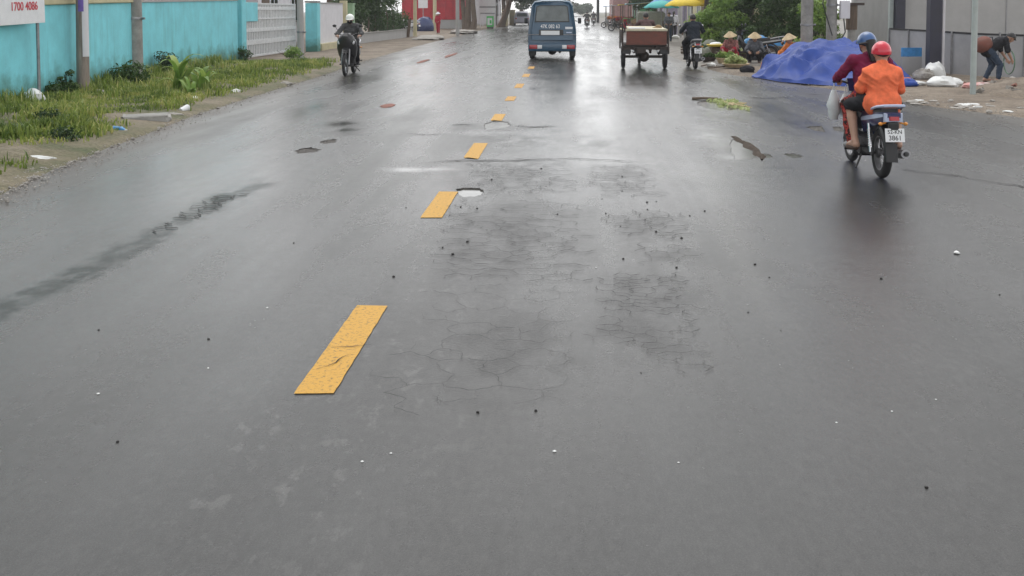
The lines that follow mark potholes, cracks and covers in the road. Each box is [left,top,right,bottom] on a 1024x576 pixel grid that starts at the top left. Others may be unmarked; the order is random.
pothole [730,140,757,160]
crack [425,158,713,373]
pothole [456,188,484,197]
pothole [484,121,512,130]
crack [372,284,573,415]
